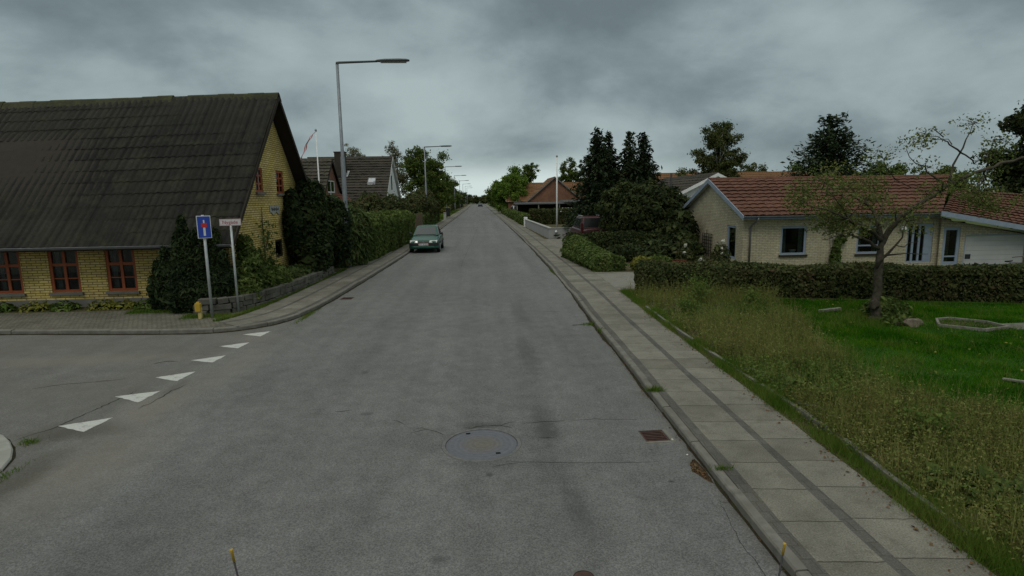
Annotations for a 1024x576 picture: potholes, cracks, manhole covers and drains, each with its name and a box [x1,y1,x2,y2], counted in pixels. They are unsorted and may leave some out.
drain grate [639,429,676,443]
manhole cover [442,428,521,462]
